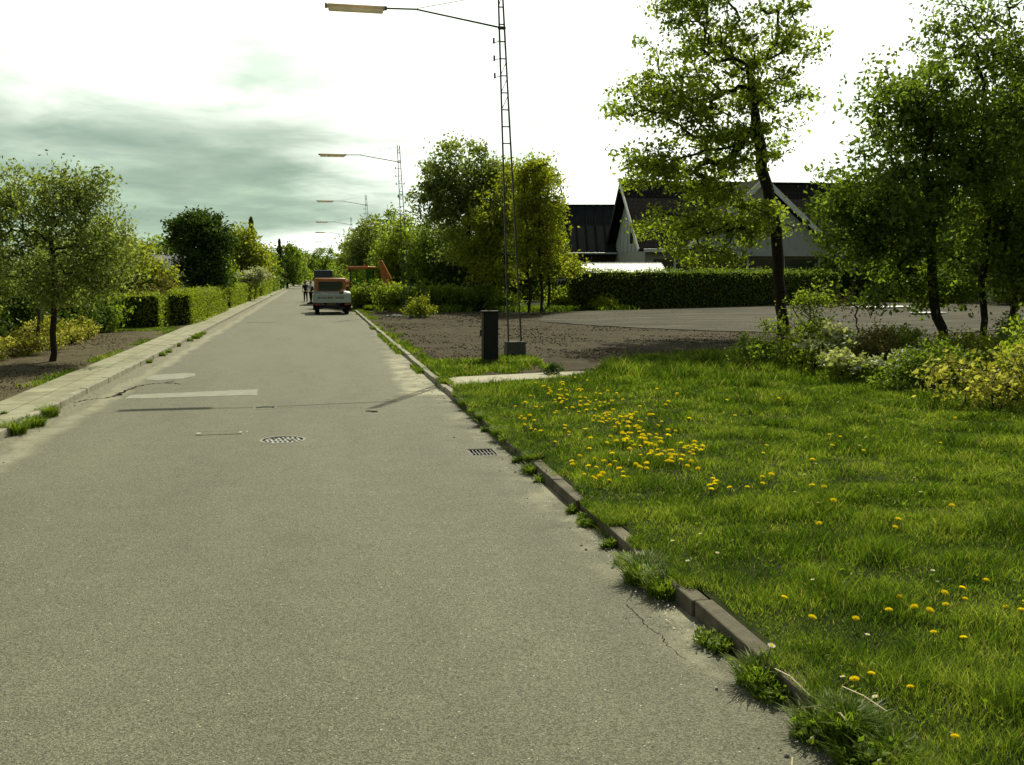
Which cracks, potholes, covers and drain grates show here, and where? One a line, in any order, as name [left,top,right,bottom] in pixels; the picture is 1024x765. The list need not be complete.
crack [627,605,686,660]
crack [73,381,178,403]
manhole cover [259,436,306,444]
